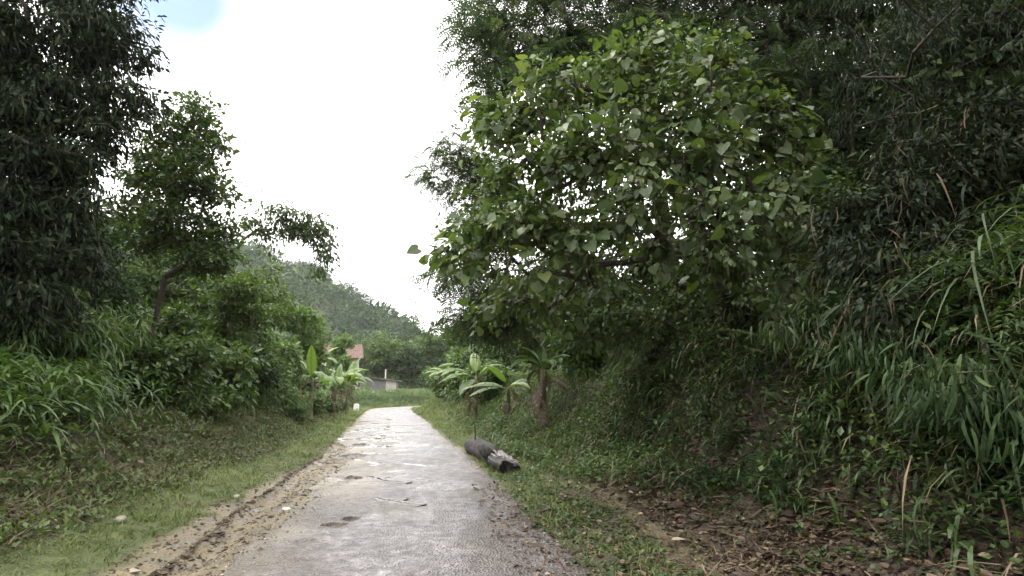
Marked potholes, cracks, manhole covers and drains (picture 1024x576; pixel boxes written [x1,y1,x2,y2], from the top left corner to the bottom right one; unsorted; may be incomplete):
pothole [318,521,352,529]
crack [361,475,424,507]
